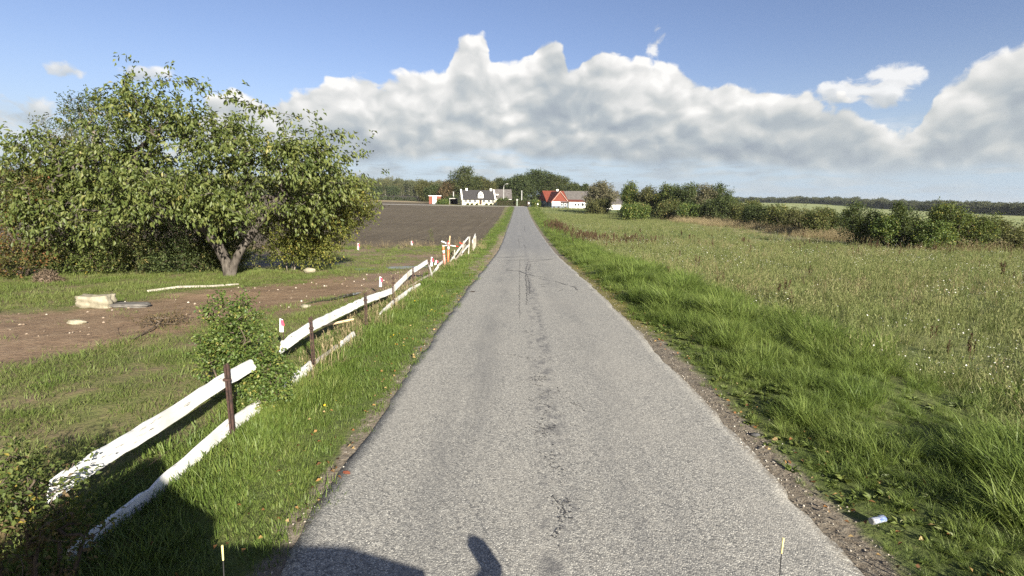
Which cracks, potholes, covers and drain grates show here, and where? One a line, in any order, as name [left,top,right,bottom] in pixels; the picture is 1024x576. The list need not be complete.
crack [505,331,585,475]
crack [503,229,578,308]
crack [547,495,580,547]
